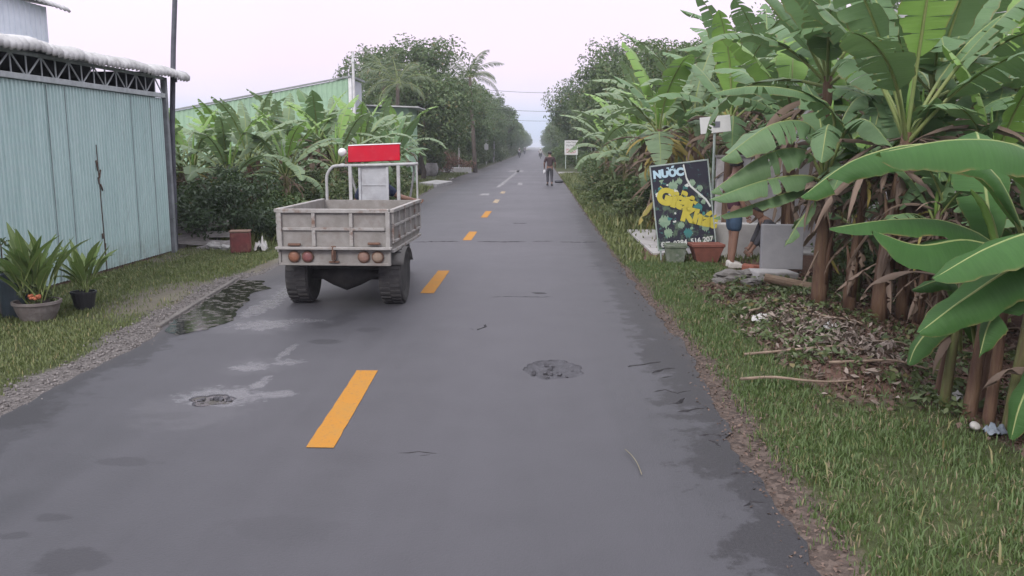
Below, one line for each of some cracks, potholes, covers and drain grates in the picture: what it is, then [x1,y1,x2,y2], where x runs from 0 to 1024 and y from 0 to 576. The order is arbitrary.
crack [628,361,704,412]
pothole [189,394,237,407]
pothole [523,360,584,380]
